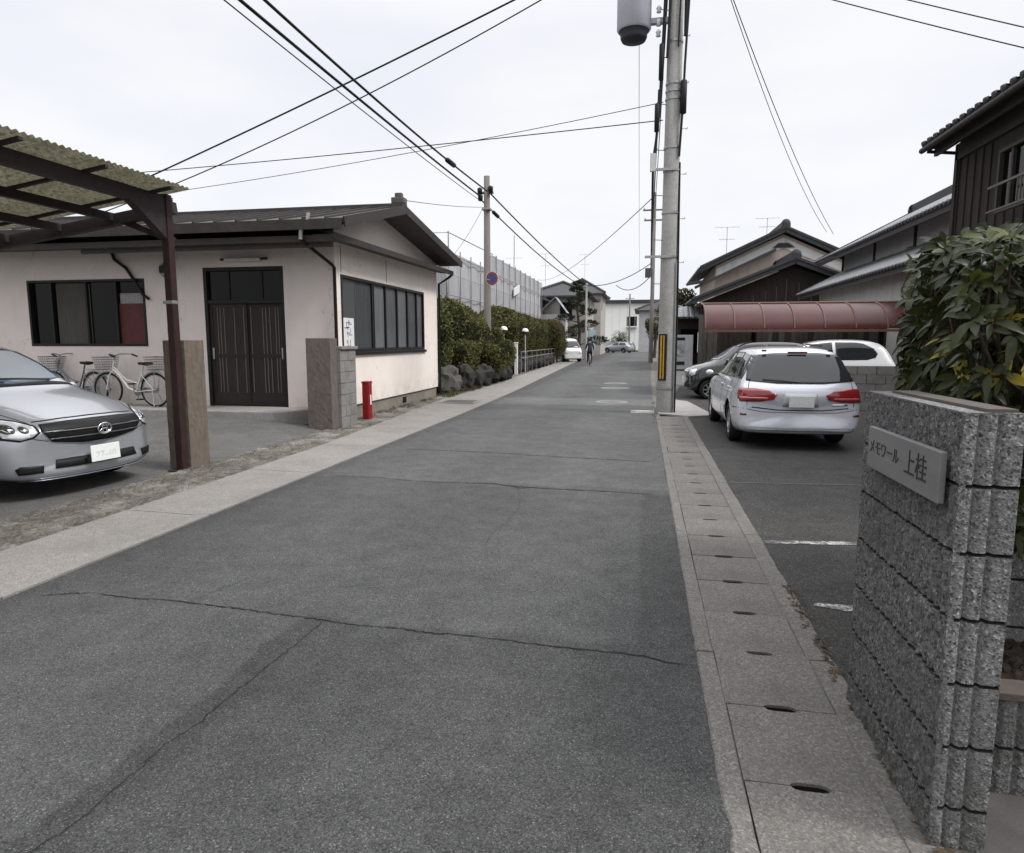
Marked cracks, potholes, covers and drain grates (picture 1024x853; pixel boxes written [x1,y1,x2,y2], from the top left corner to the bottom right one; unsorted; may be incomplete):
crack [418,449,649,462]
crack [358,476,642,540]
crack [28,575,697,853]
